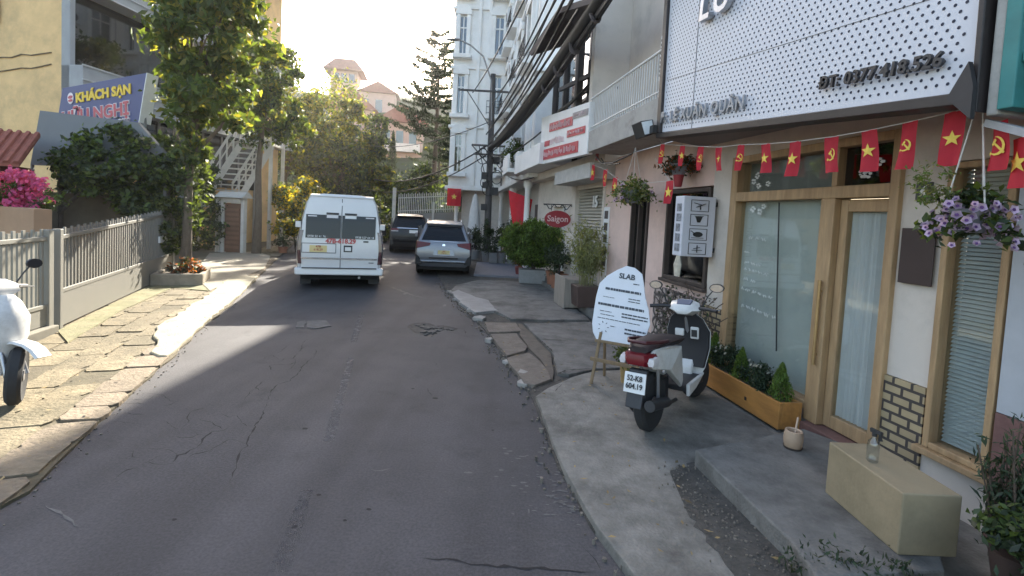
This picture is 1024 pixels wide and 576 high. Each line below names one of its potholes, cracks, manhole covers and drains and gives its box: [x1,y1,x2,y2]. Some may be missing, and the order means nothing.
crack [411,548,601,572]
pothole [407,322,457,337]
crack [111,327,325,482]
